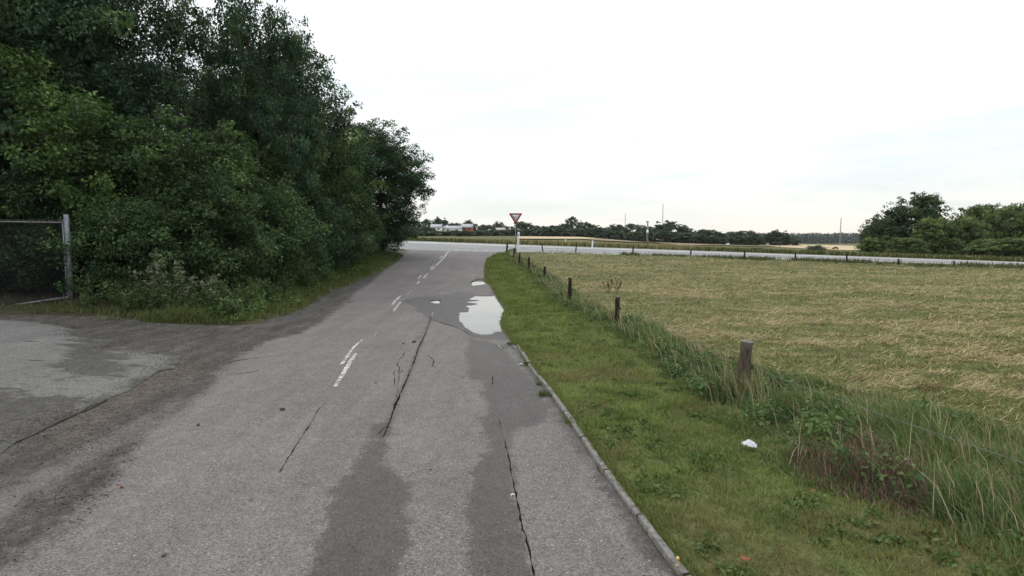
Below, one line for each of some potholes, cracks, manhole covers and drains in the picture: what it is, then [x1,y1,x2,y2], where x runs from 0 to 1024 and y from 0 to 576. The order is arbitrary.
crack [279,406,322,472]
